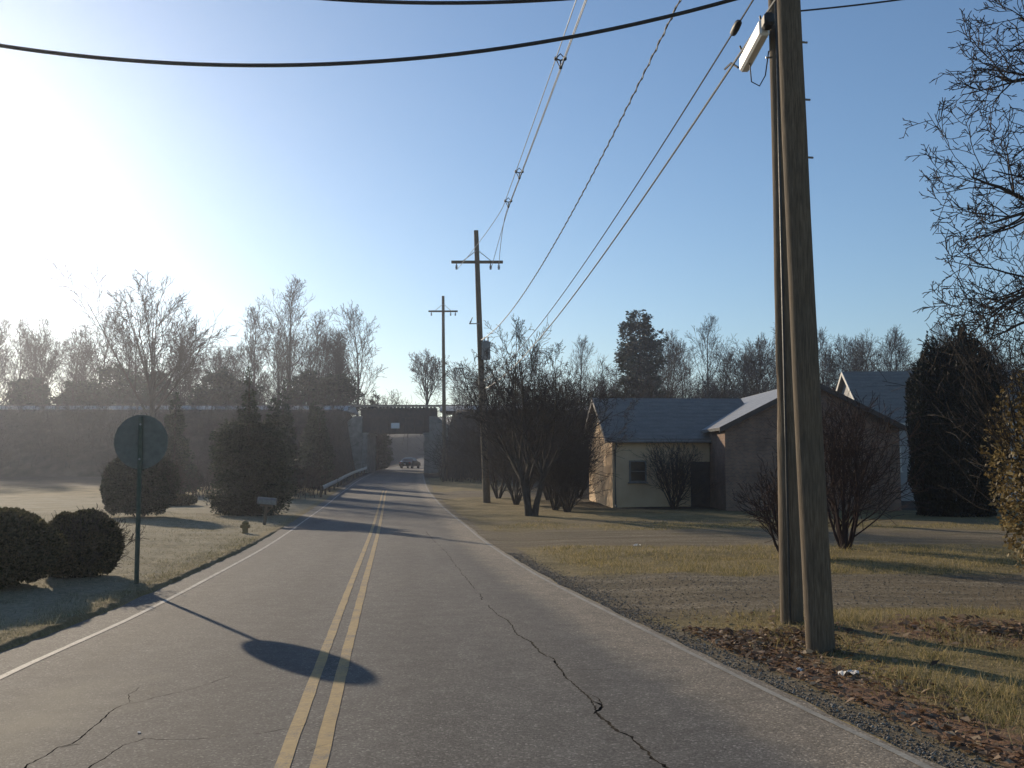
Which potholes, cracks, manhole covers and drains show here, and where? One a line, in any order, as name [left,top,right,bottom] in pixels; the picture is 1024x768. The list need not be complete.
crack [427,533,669,768]
crack [24,676,312,768]
